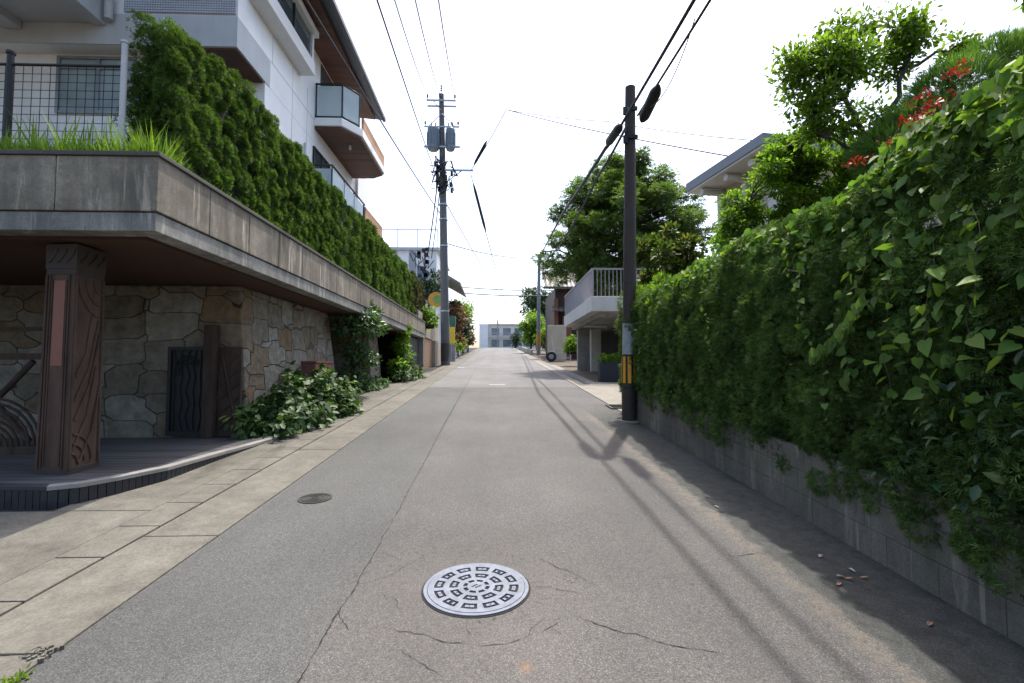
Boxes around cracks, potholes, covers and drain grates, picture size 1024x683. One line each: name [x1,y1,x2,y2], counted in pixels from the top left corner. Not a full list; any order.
crack [337,552,600,672]
crack [579,616,726,654]
utility cover [297,493,333,504]
manhole cover [421,563,531,619]
crack [0,646,50,657]
